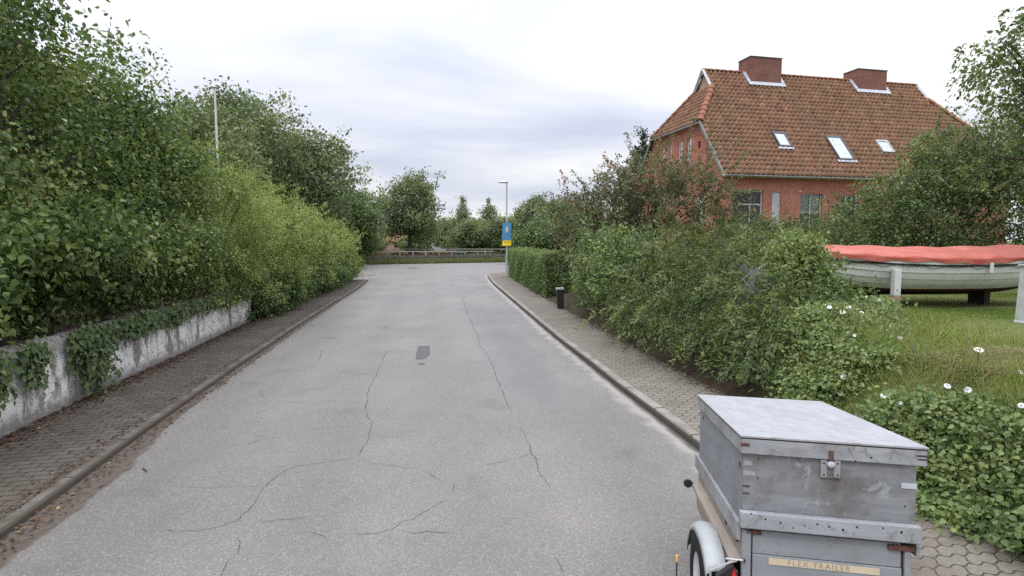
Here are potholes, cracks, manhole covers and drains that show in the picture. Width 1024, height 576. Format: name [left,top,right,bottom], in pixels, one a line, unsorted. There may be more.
crack [167,352,455,539]
crack [463,300,547,482]
